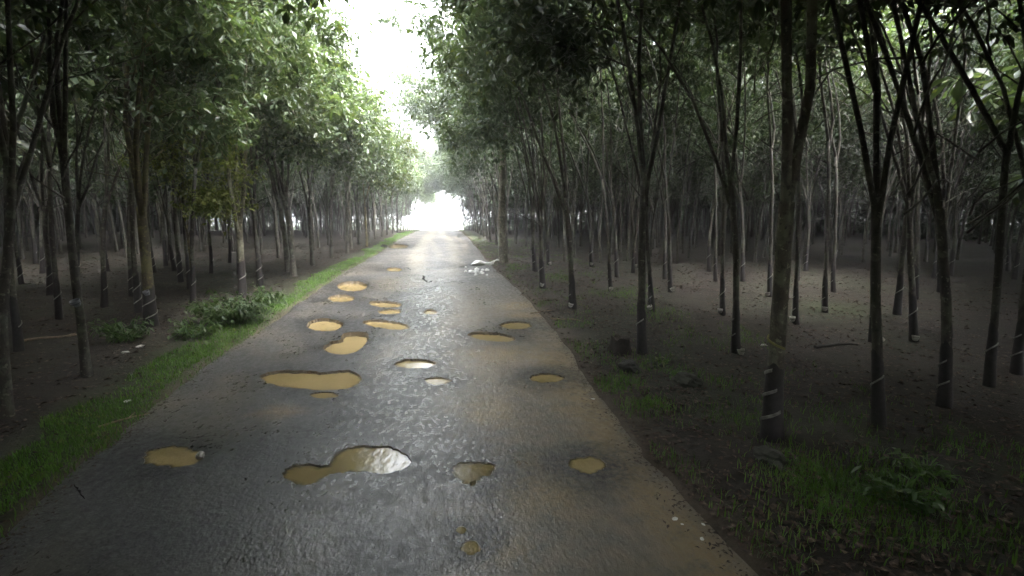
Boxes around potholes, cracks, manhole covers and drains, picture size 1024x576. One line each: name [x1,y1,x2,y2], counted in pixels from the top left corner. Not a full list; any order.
pothole [568,456,607,474]
pothole [282,445,412,485]
pothole [259,370,362,390]
pothole [424,377,452,385]
pothole [529,373,565,383]
pothole [327,294,355,302]
pothole [142,445,206,468]
pothole [323,332,370,355]
pothole [337,281,367,291]
pothole [306,318,344,331]
pothole [362,319,410,330]
pothole [451,461,496,487]
